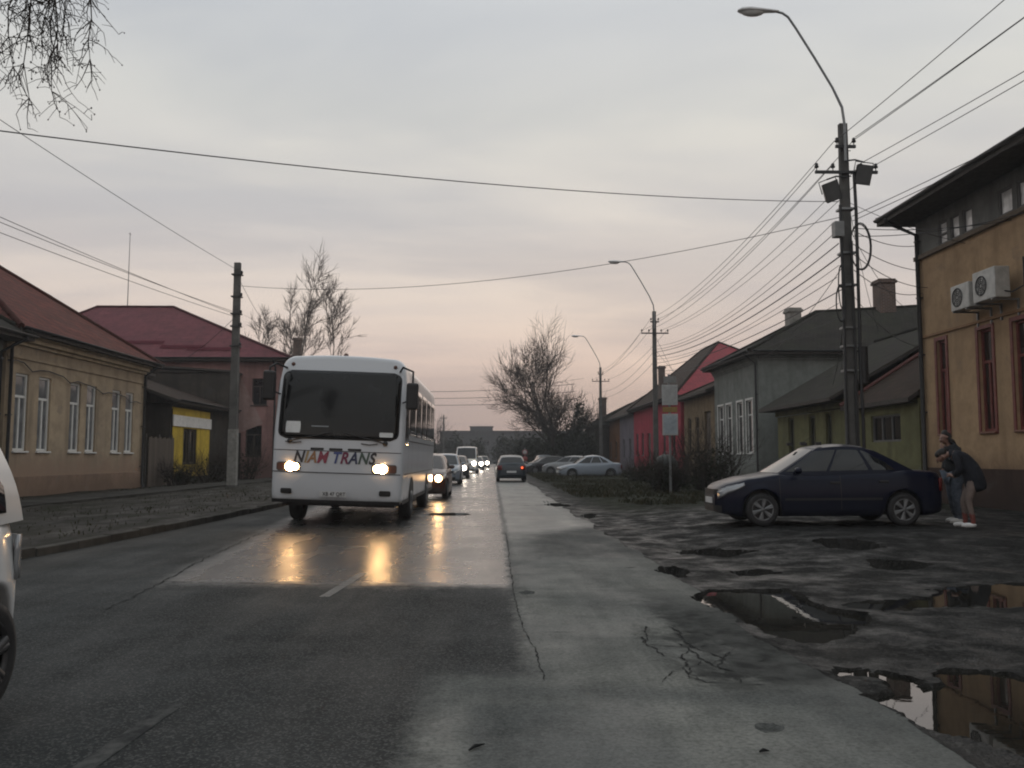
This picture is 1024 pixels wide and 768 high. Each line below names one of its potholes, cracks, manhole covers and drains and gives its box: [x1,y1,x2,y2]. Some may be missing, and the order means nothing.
pothole [842,582,1024,612]
pothole [654,566,691,578]
pothole [811,538,887,551]
pothole [755,723,784,733]
pothole [823,666,1024,757]
pothole [676,548,758,558]
crack [640,626,769,685]
pothole [865,559,936,571]
pothole [690,588,876,644]
